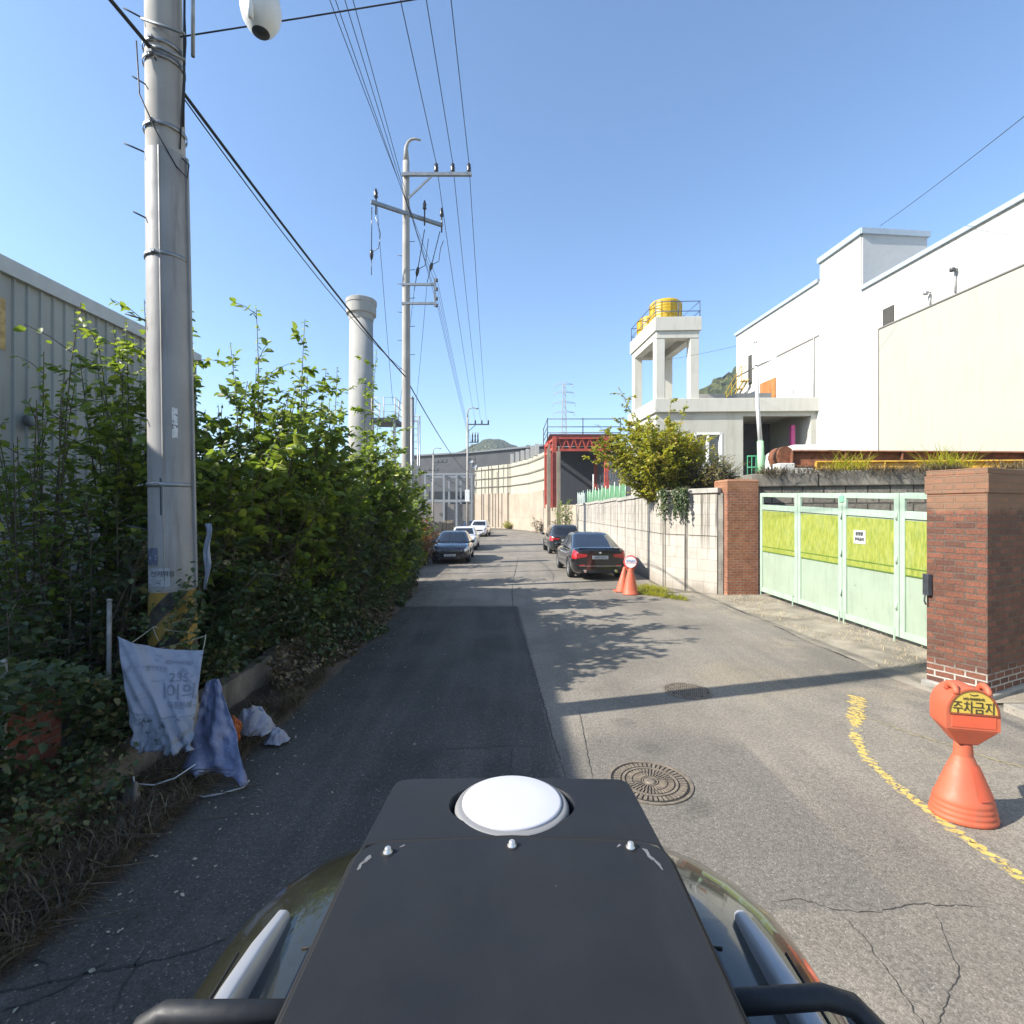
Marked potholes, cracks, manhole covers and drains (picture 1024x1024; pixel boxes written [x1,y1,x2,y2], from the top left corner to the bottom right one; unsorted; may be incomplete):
manhole cover [608,761,694,805]
crack [768,898,981,1024]
crack [0,936,230,1012]
